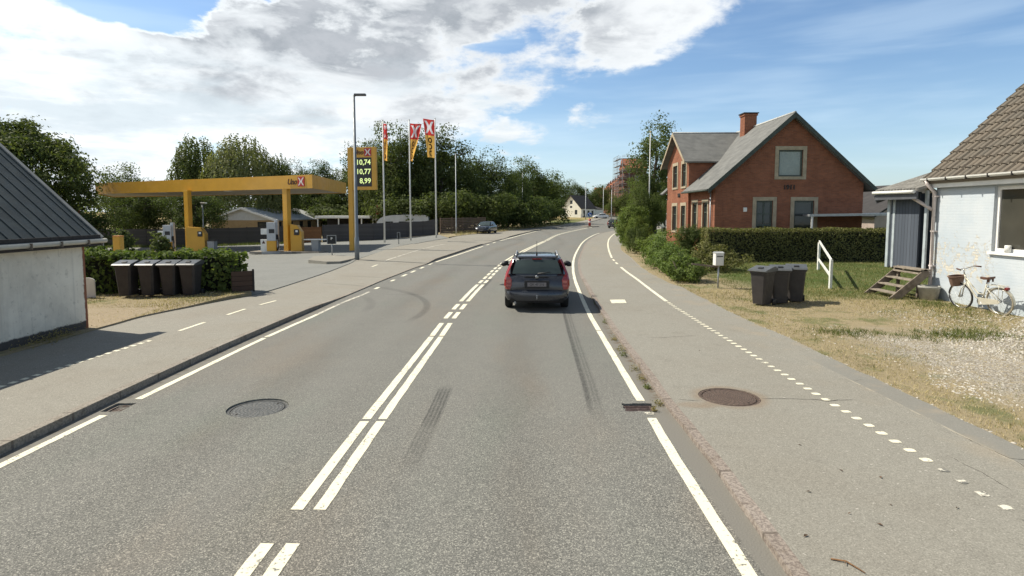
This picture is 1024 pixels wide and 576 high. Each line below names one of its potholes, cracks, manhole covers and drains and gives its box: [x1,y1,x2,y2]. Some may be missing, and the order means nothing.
manhole cover [698,389,761,407]
manhole cover [226,400,289,418]
